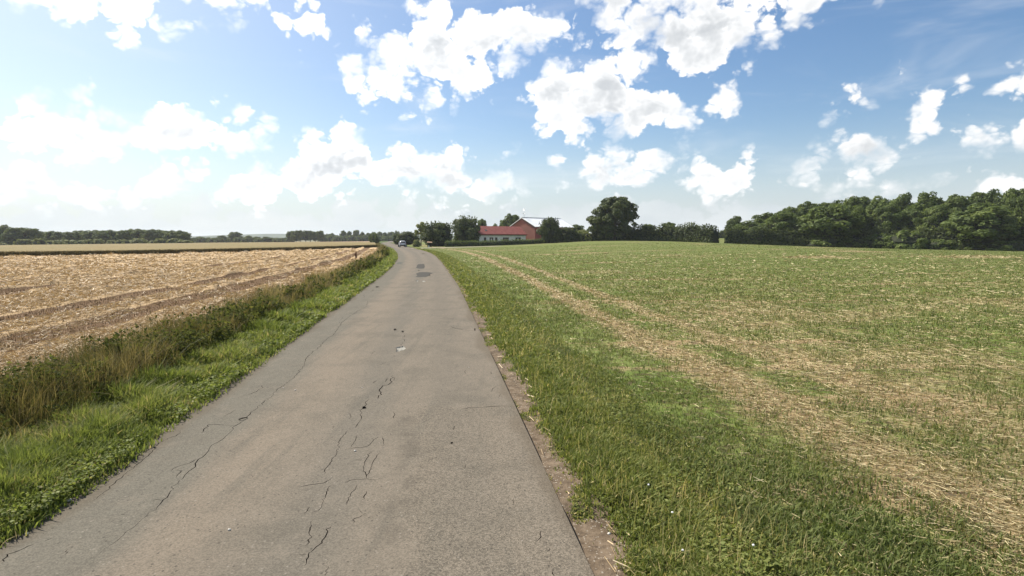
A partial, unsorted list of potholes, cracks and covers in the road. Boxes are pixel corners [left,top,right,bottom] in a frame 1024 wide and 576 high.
crack [77,290,374,570]
crack [303,338,405,575]
